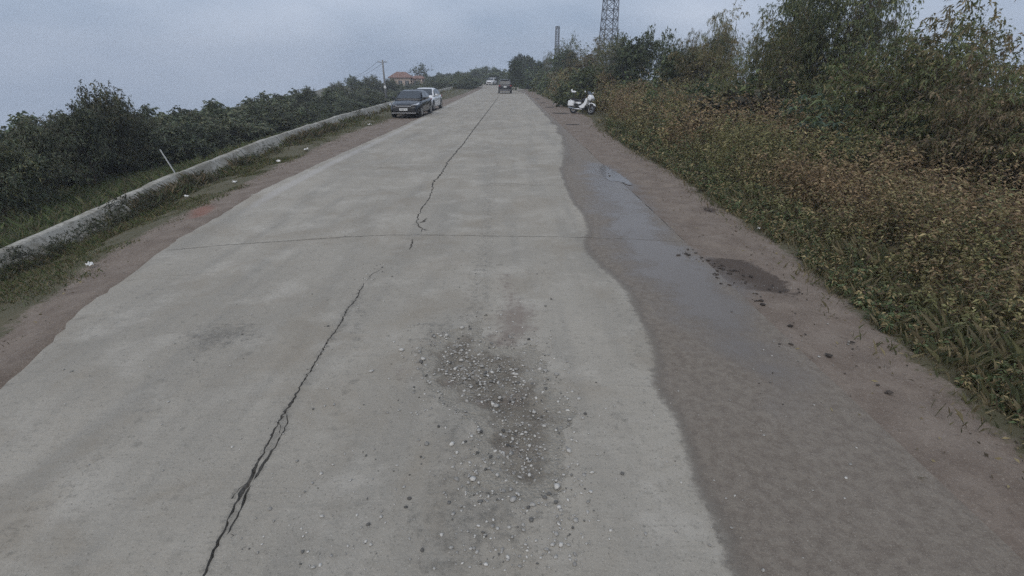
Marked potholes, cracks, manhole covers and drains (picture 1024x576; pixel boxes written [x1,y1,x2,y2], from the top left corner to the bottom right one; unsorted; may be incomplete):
crack [409,95,500,249]
crack [203,269,381,576]
pothole [415,321,578,505]
